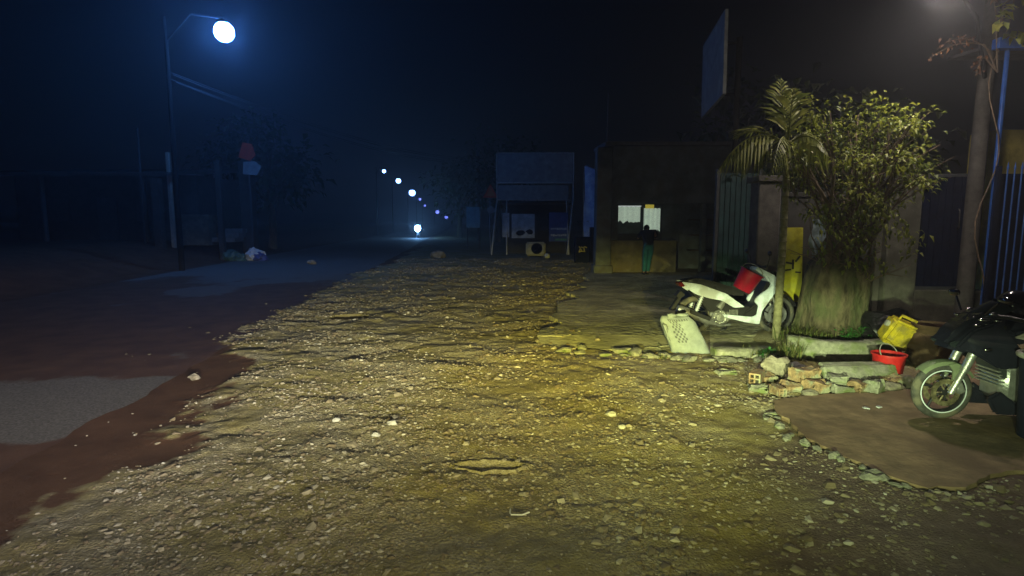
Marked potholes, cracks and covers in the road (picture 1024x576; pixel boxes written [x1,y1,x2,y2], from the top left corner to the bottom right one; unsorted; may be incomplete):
pothole [449,458,535,475]
